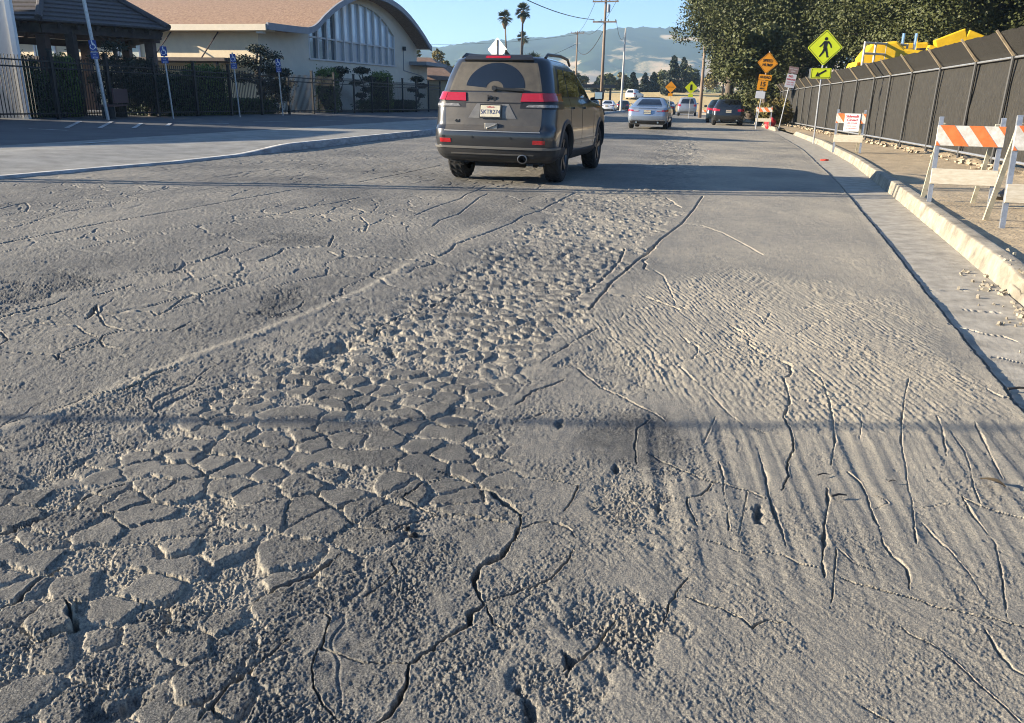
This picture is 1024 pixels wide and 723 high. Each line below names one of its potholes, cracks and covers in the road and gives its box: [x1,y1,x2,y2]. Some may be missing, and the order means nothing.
crack [610,294,684,311]
crack [491,202,685,251]
crack [647,452,767,499]
crack [704,539,819,568]
crack [312,648,338,722]
crack [411,470,523,664]
crack [515,521,576,541]
crack [676,363,769,434]
crack [0,607,299,723]
crack [317,611,409,666]
pothole [753,507,763,525]
crack [686,482,714,526]
